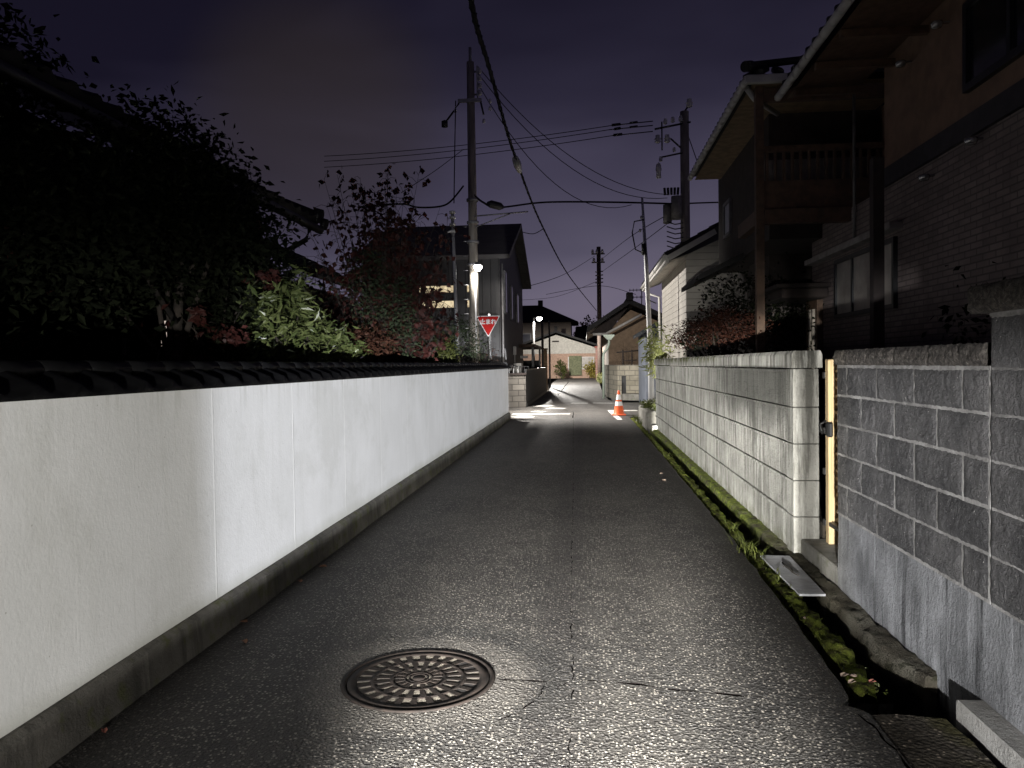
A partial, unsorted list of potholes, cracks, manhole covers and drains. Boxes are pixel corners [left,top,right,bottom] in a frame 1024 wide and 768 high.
drain grate [760,555,826,596]
manhole cover [341,650,495,713]
crack [858,714,911,768]
crack [498,412,762,768]
